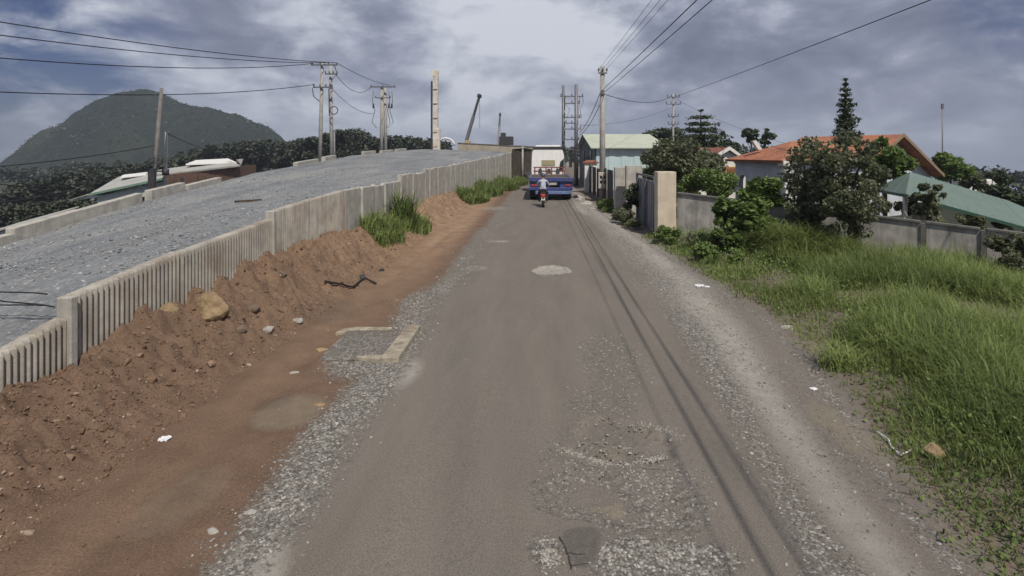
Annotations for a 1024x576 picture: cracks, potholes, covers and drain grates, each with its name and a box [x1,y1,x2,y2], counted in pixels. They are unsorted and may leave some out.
crack [559,536,587,569]
pothole [527,469,717,543]
pothole [557,411,695,472]
